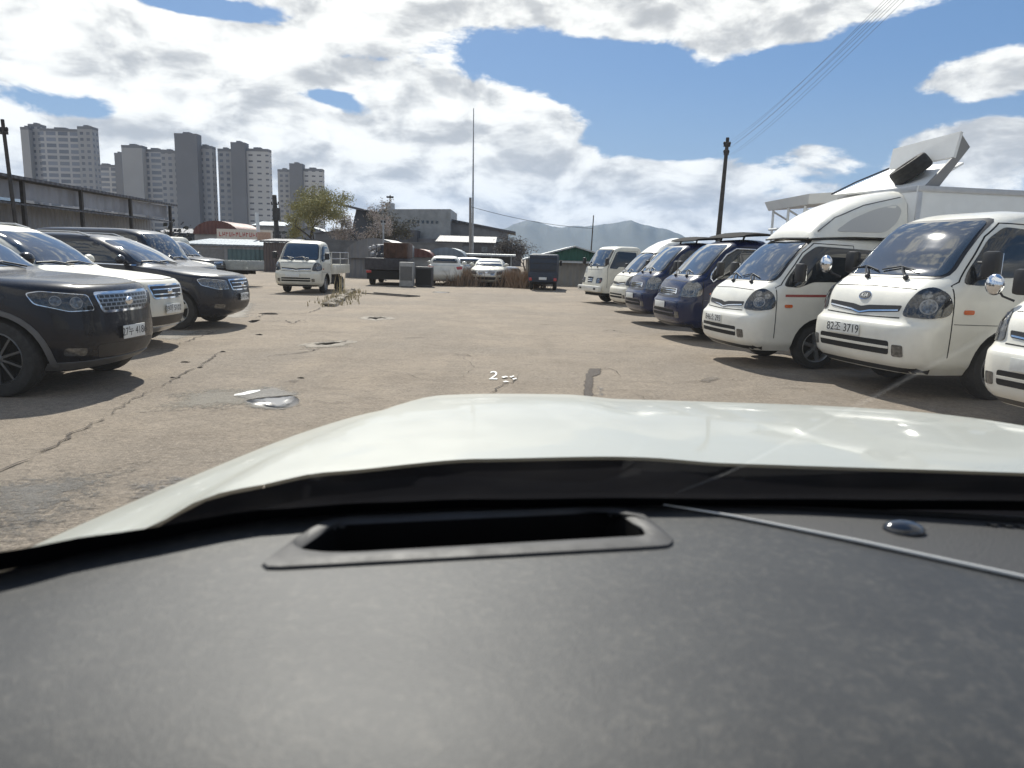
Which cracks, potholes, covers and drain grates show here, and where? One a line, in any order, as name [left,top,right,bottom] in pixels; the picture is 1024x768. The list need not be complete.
pothole [246,396,299,409]
crack [0,351,221,470]
